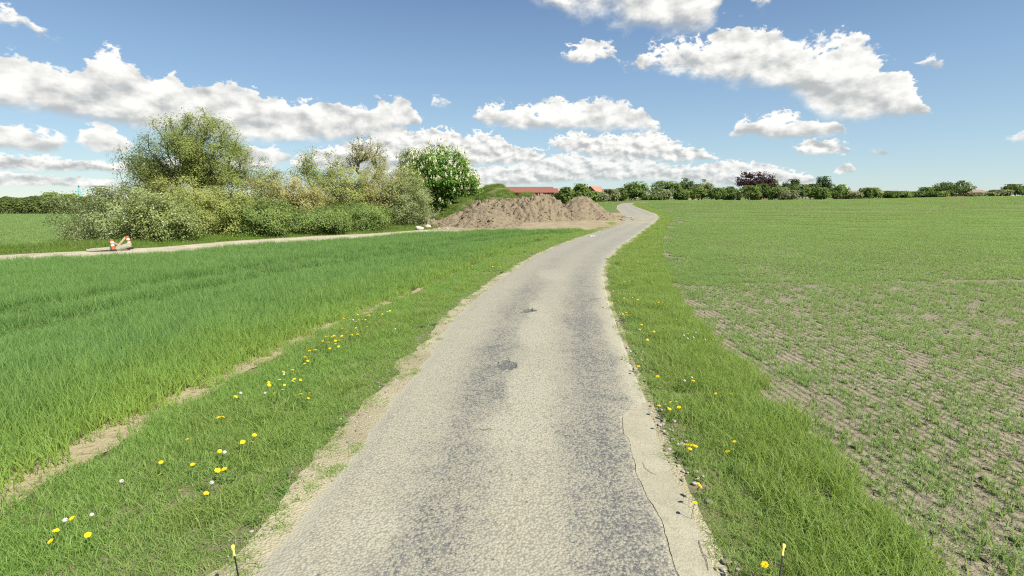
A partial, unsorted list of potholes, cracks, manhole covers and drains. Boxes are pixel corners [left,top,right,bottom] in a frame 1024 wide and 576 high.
pothole [515,306,540,315]
crack [622,417,680,576]
pothole [488,354,523,374]
